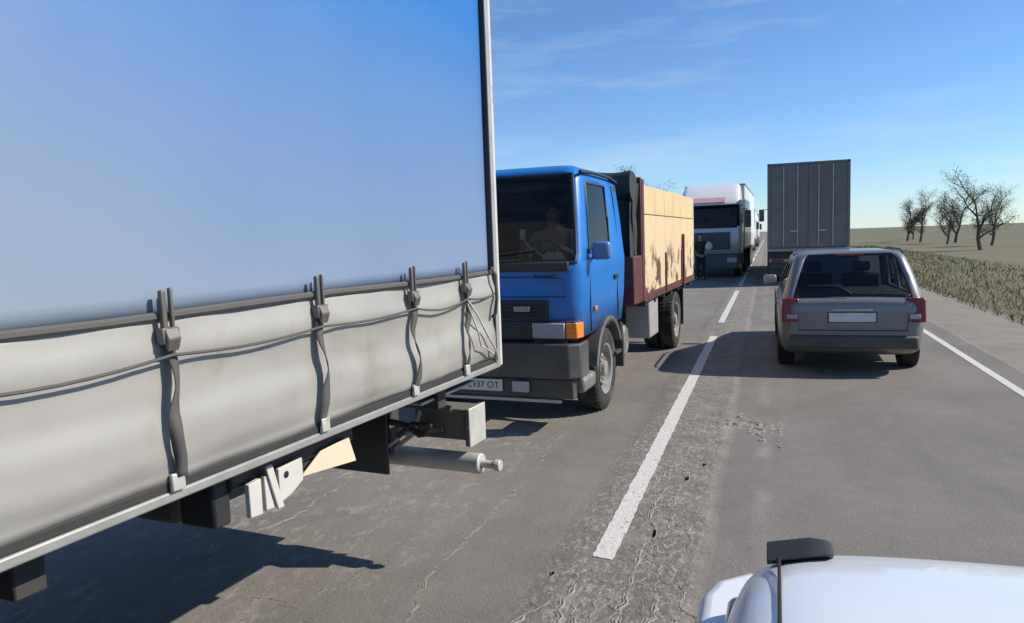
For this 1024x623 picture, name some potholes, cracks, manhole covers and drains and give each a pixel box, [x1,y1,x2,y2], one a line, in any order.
crack [405,428,569,623]
crack [510,411,784,623]
crack [253,484,346,535]
